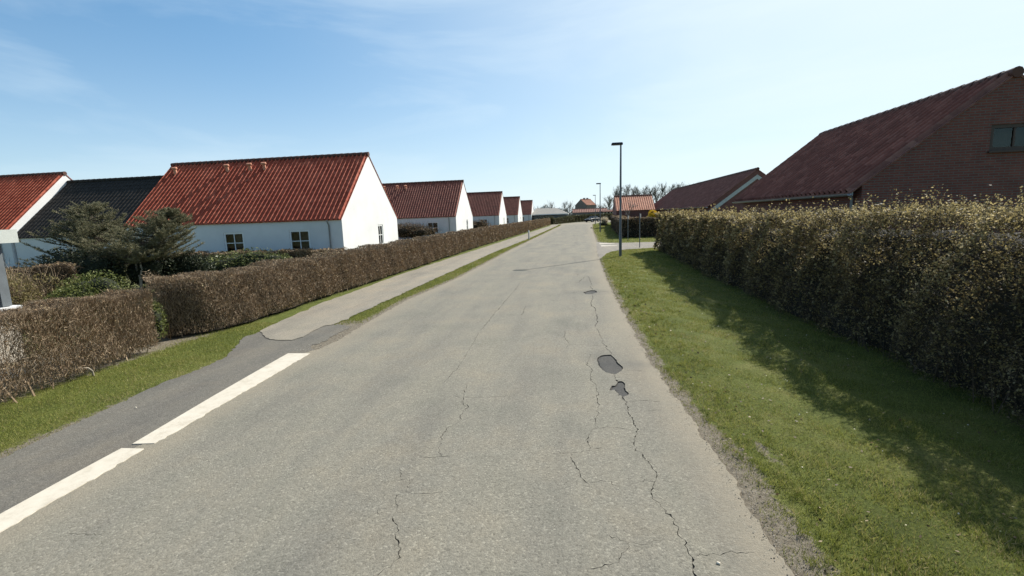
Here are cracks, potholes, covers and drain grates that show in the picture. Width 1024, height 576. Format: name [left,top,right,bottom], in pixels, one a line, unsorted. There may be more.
crack [377,473,439,575]
crack [553,274,754,576]
pothole [597,355,623,374]
pothole [610,381,629,397]
